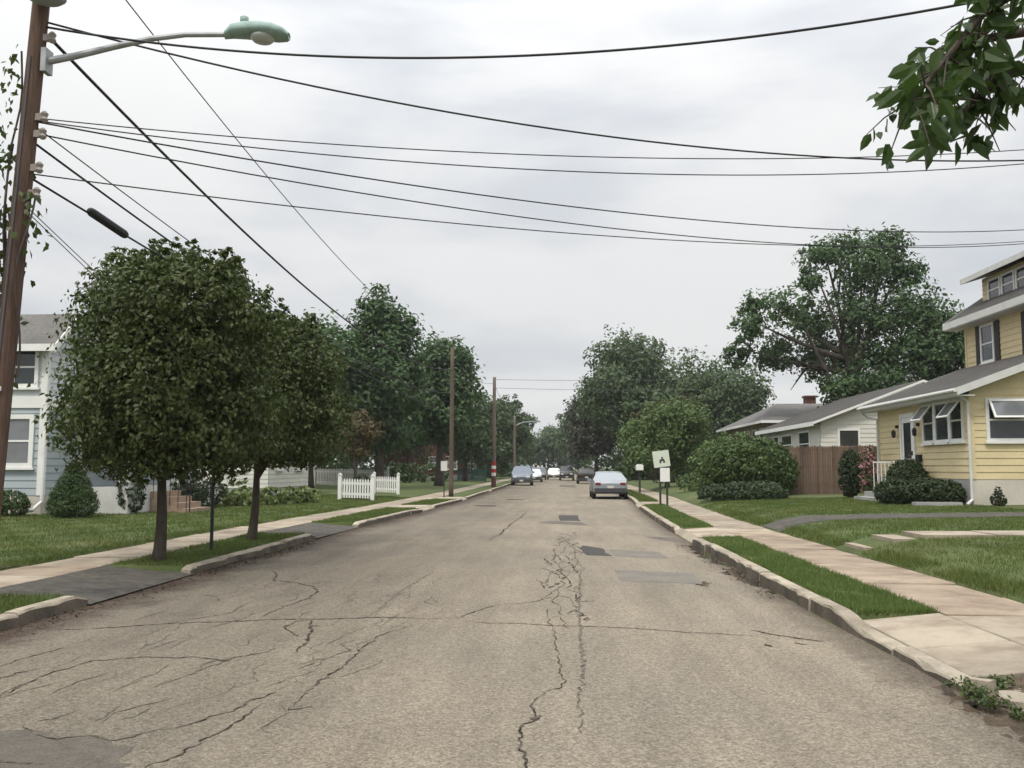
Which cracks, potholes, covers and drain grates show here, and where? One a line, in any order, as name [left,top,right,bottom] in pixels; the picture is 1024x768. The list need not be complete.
crack [0,532,819,768]
